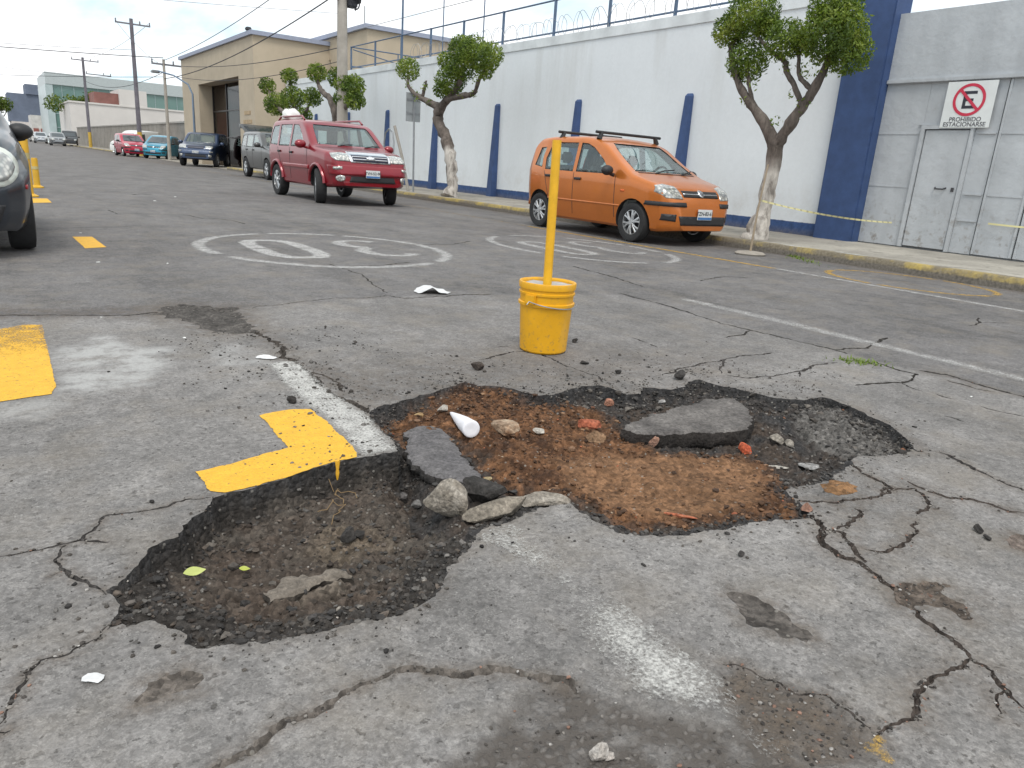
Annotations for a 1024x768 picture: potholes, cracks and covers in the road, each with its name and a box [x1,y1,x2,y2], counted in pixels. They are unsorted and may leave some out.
pothole [369,379,917,542]
crack [212,665,578,768]
crack [0,496,214,594]
crack [723,451,1024,737]
pothole [106,451,476,649]
crack [253,262,492,308]
crack [573,266,1024,417]
crack [0,626,107,734]
